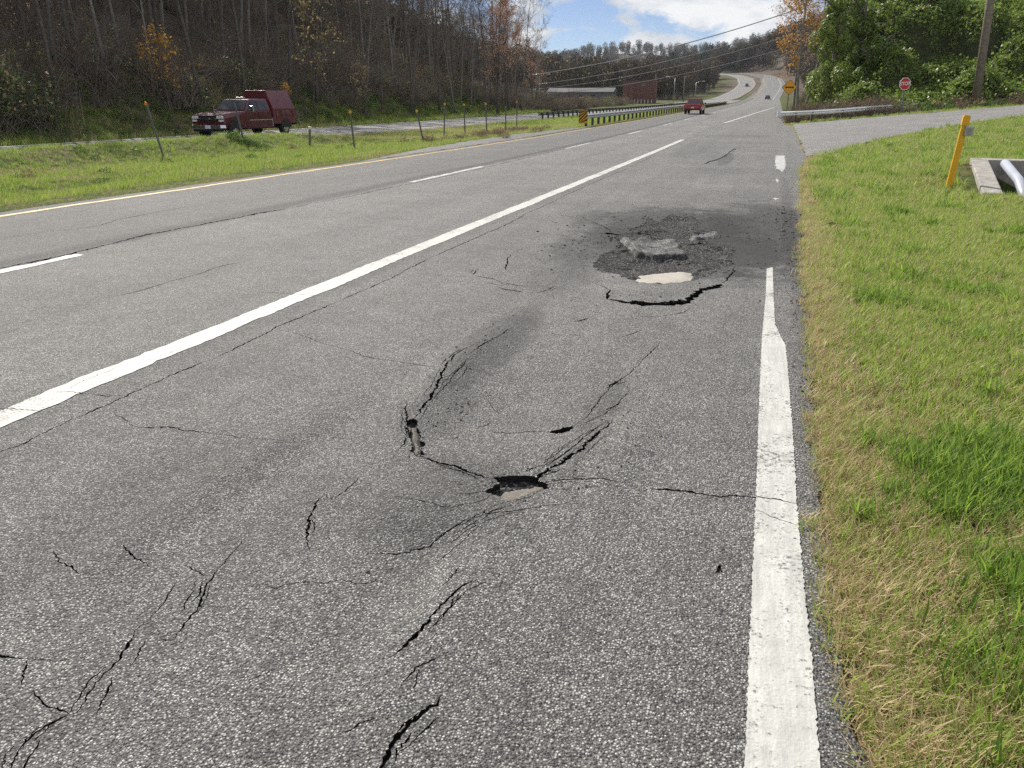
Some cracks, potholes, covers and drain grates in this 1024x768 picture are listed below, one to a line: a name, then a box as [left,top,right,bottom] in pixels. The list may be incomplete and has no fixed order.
pothole [593,214,736,284]
pothole [486,475,549,502]
crack [645,488,800,527]
crack [0,158,664,768]
